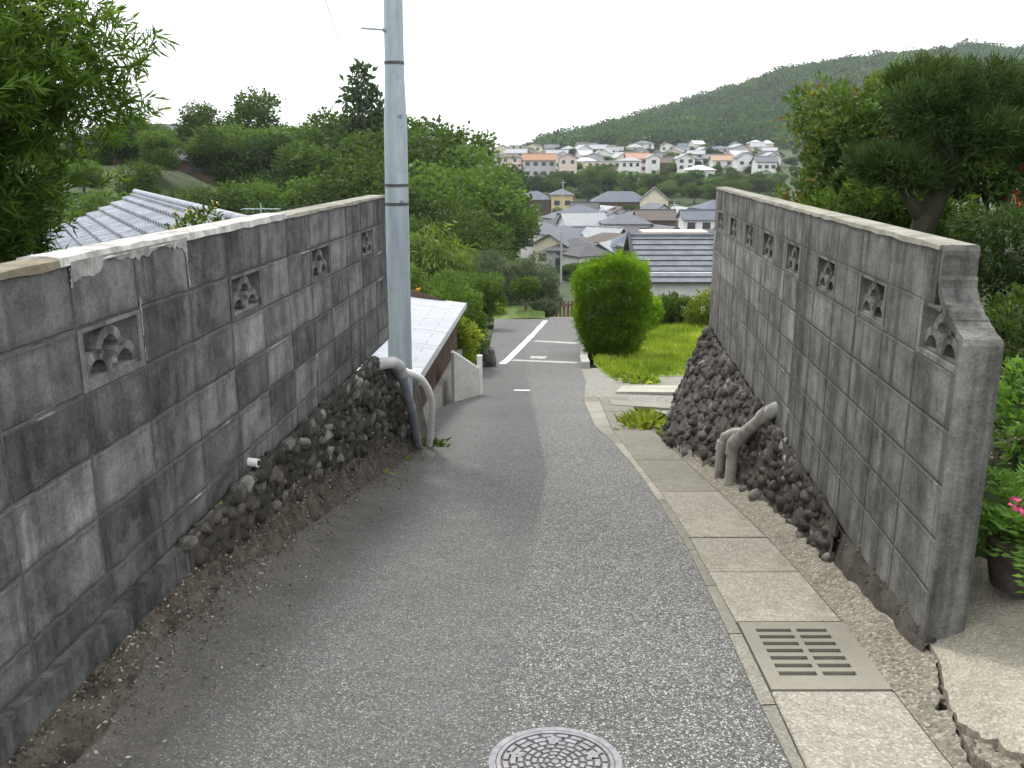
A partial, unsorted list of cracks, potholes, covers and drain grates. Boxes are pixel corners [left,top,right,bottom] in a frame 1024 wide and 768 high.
manhole cover [488,727,622,768]
crack [938,676,1024,768]
